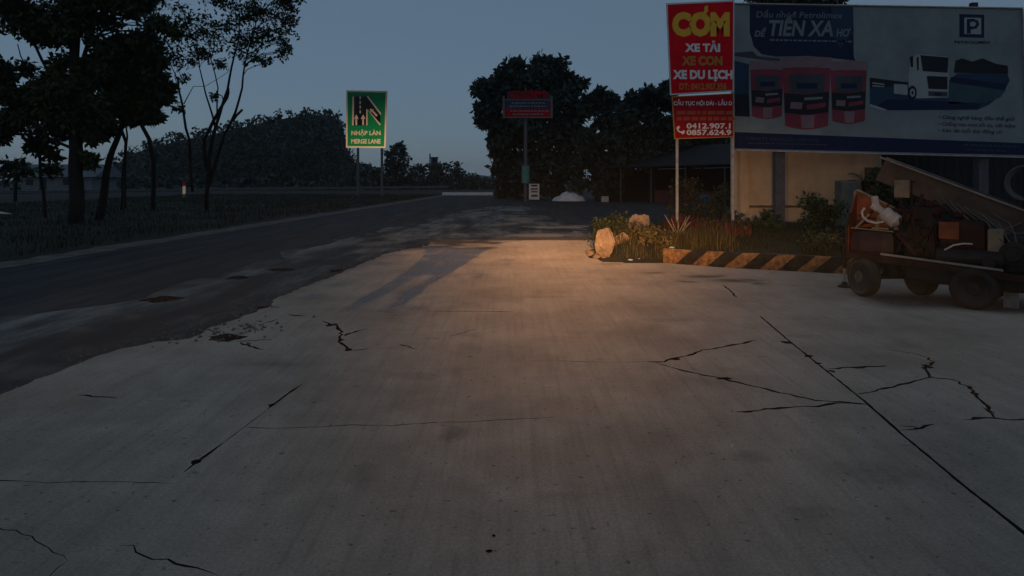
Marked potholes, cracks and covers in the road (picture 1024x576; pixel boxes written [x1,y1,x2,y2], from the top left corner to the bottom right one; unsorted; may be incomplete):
crack [119,545,219,576]
crack [0,528,68,573]
crack [645,340,1024,420]
pothole [209,333,248,342]
crack [323,321,369,351]
